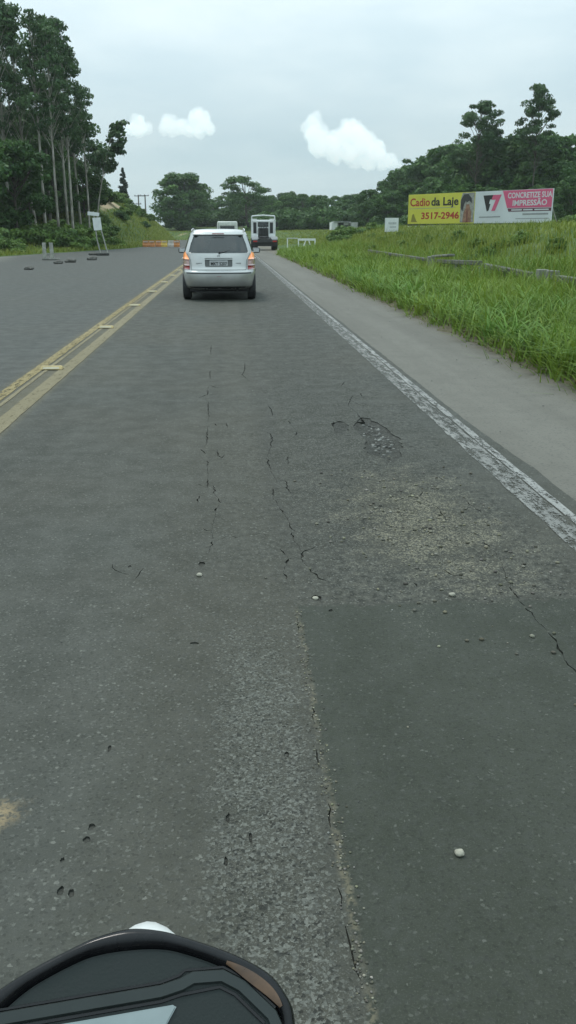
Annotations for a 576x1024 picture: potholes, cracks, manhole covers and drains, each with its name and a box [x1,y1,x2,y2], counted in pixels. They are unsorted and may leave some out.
crack [410,446,576,672]
crack [197,347,236,554]
crack [297,620,361,981]
pothole [331,421,349,434]
crack [243,363,327,581]
pothole [353,418,403,462]
